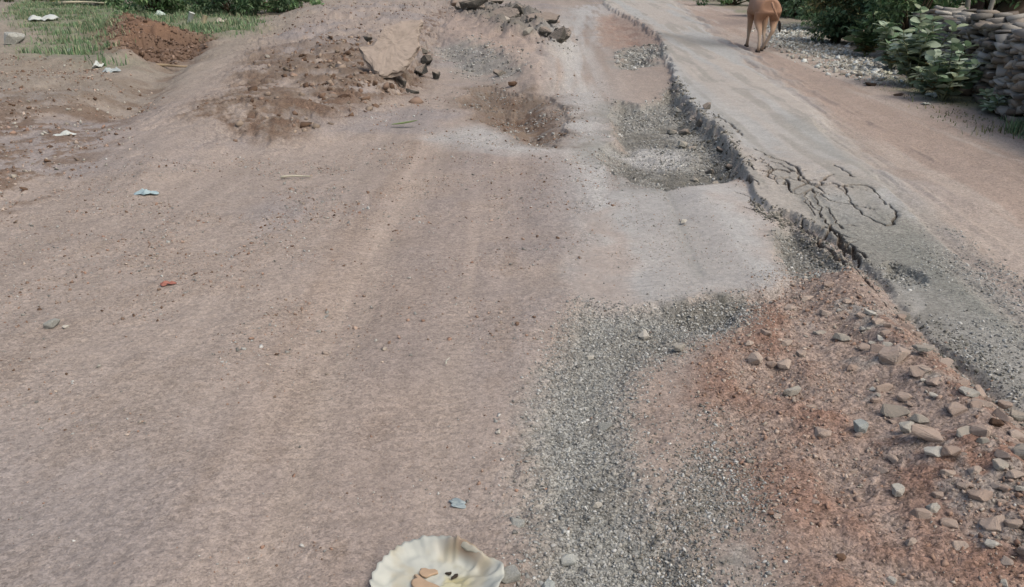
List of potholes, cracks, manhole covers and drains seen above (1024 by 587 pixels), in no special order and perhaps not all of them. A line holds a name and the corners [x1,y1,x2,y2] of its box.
pothole [455,86,573,147]
pothole [597,84,739,191]
pothole [670,303,741,334]
pothole [614,45,662,69]
crack [725,148,898,305]
